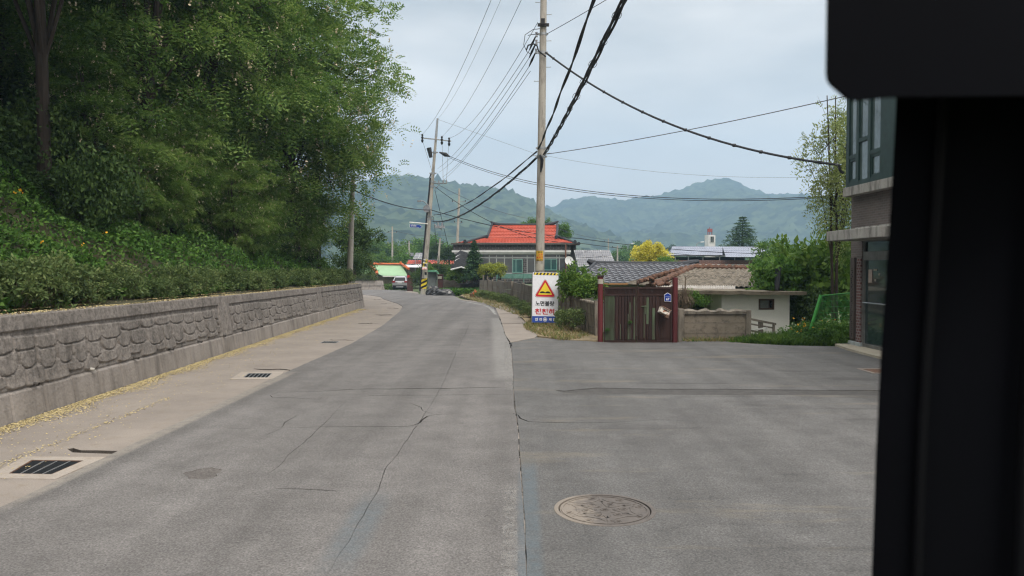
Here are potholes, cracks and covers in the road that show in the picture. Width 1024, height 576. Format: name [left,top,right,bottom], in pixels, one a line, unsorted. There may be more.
drain grate [0,456,105,479]
manhole cover [554,494,656,527]
drain grate [230,371,284,380]
